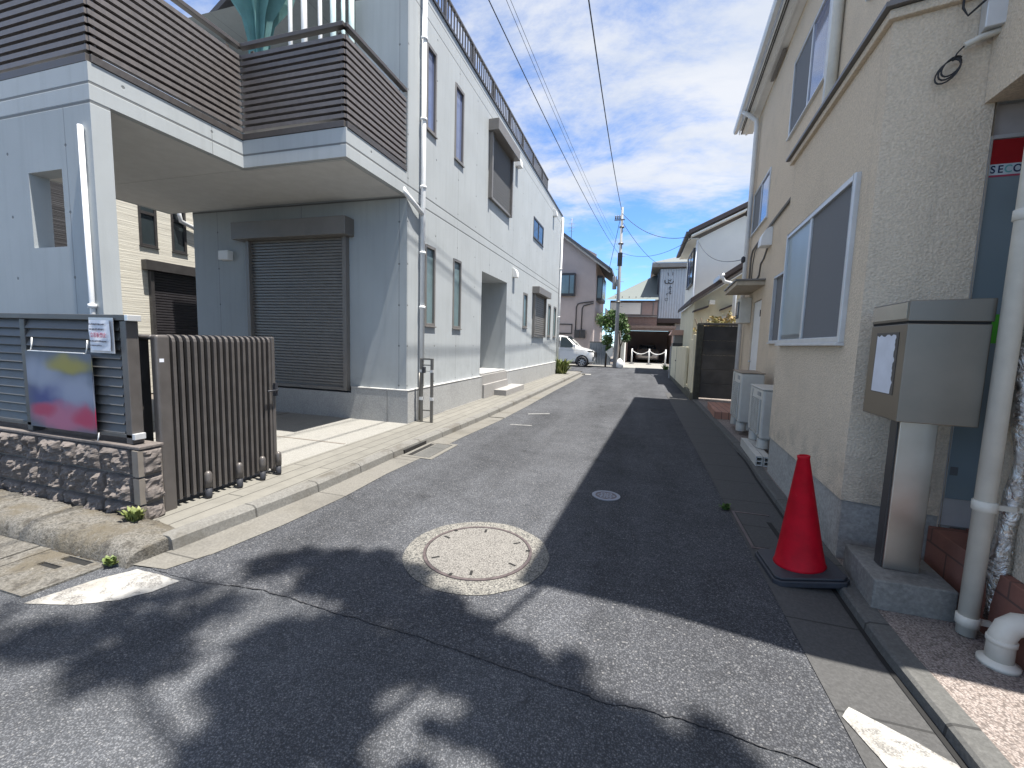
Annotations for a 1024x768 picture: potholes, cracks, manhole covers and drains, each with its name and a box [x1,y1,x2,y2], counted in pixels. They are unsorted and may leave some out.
crack [234,585,823,768]
utility cover [592,490,620,501]
manhole cover [402,522,549,595]
